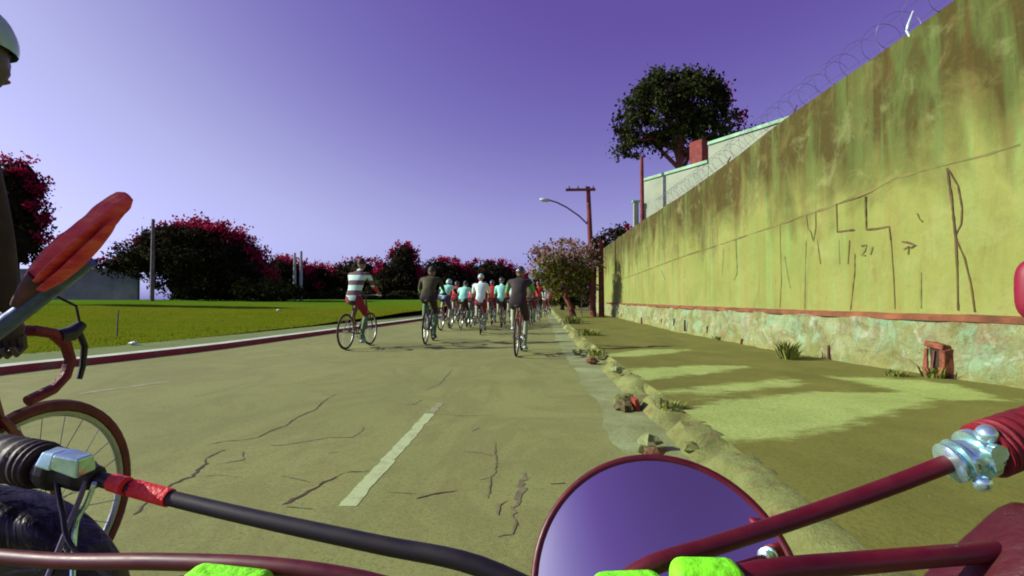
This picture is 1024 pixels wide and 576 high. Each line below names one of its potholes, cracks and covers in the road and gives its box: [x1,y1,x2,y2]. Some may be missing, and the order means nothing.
crack [410,371,528,537]
crack [386,490,457,499]
crack [133,394,364,515]
